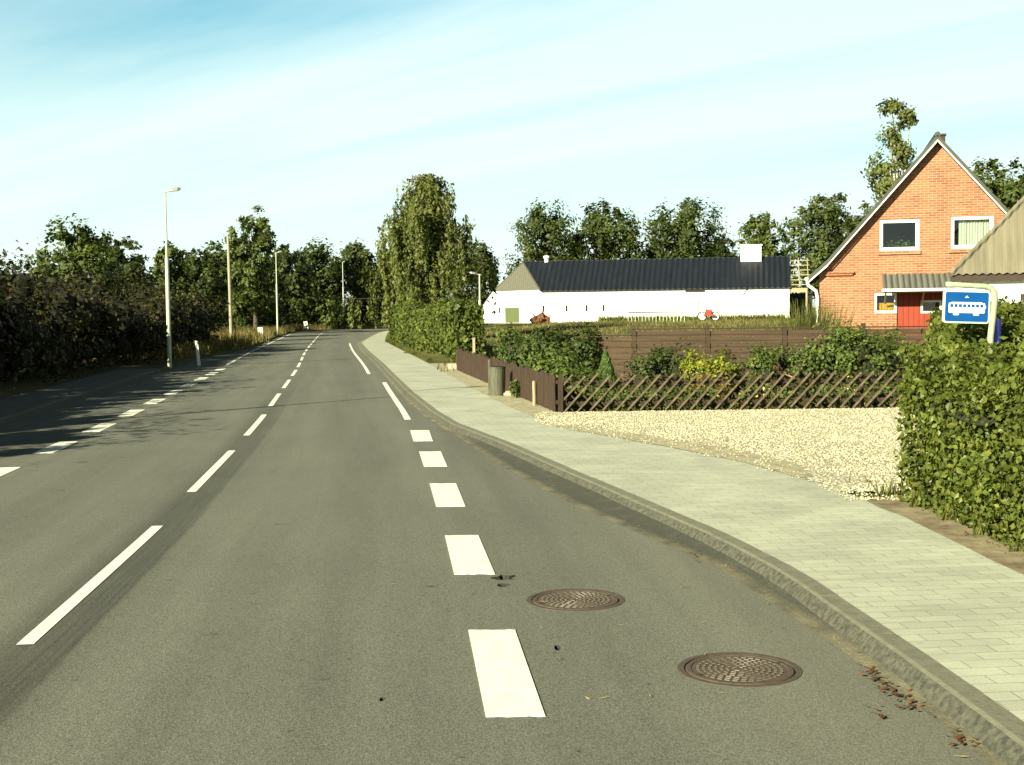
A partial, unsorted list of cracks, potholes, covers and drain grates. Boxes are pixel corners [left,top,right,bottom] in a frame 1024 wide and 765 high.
manhole cover [678,652,803,687]
manhole cover [526,589,625,611]
